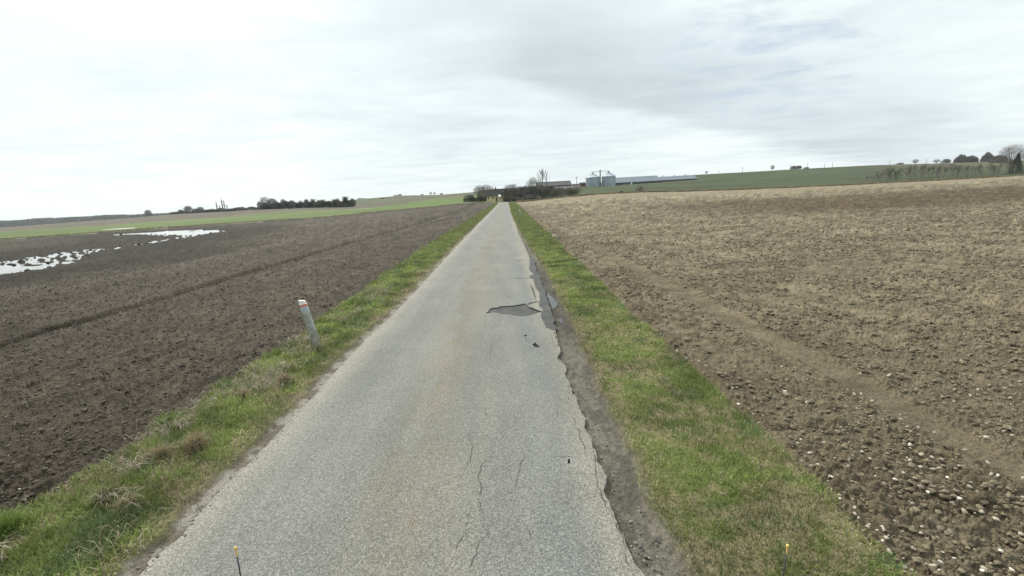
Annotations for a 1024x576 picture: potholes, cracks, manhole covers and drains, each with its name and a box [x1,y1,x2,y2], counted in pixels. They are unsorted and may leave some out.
crack [554,408,628,564]
crack [456,438,487,567]
pothole [486,304,542,316]
